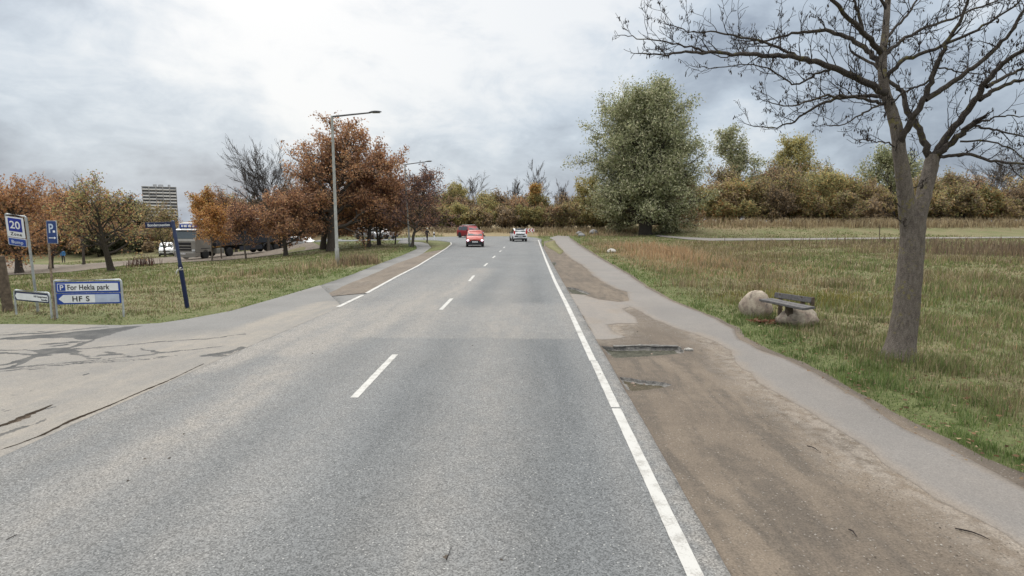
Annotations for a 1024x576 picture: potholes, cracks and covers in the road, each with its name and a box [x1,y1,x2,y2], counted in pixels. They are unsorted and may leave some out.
pothole [620,377,671,391]
pothole [601,344,684,358]
crack [0,404,53,427]
